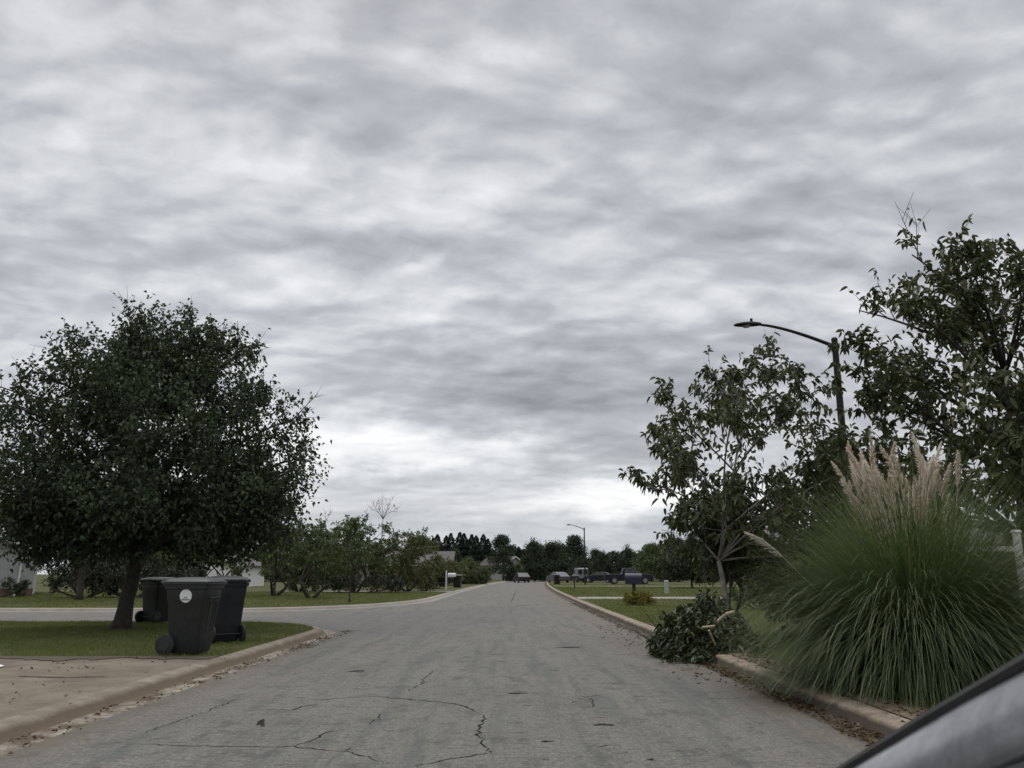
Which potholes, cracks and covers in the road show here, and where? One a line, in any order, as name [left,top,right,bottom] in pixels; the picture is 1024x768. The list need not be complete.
crack [146,700,381,762]
crack [293,671,492,767]
